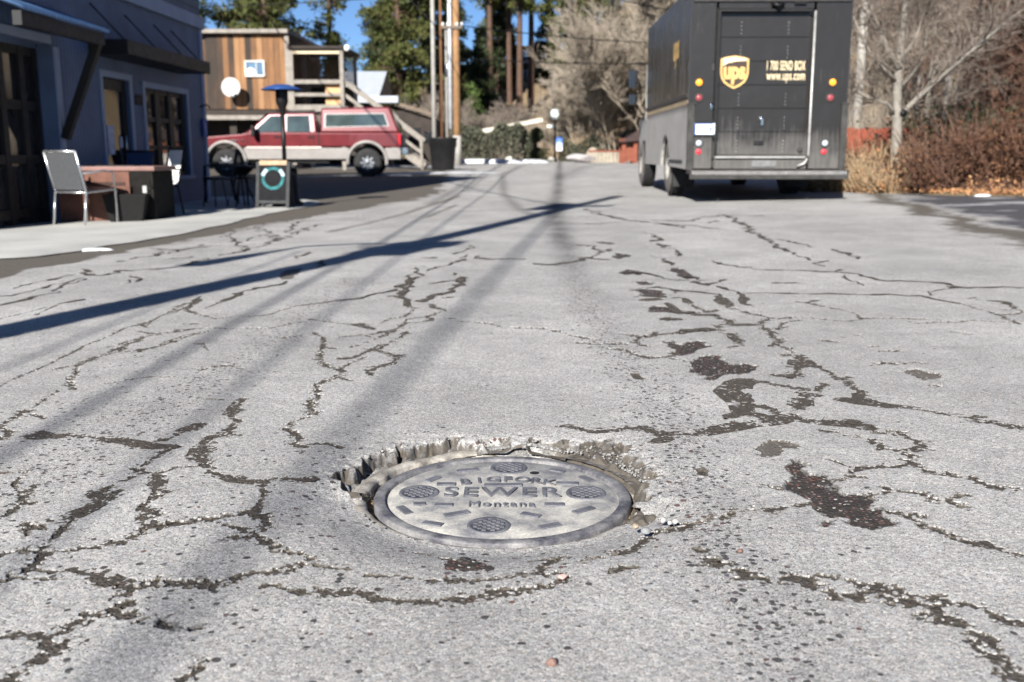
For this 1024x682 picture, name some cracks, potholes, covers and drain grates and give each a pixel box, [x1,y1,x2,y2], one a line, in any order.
manhole cover [353,450,634,550]
crack [0,209,1024,682]
pothole [690,355,757,380]
pothole [785,461,896,530]
